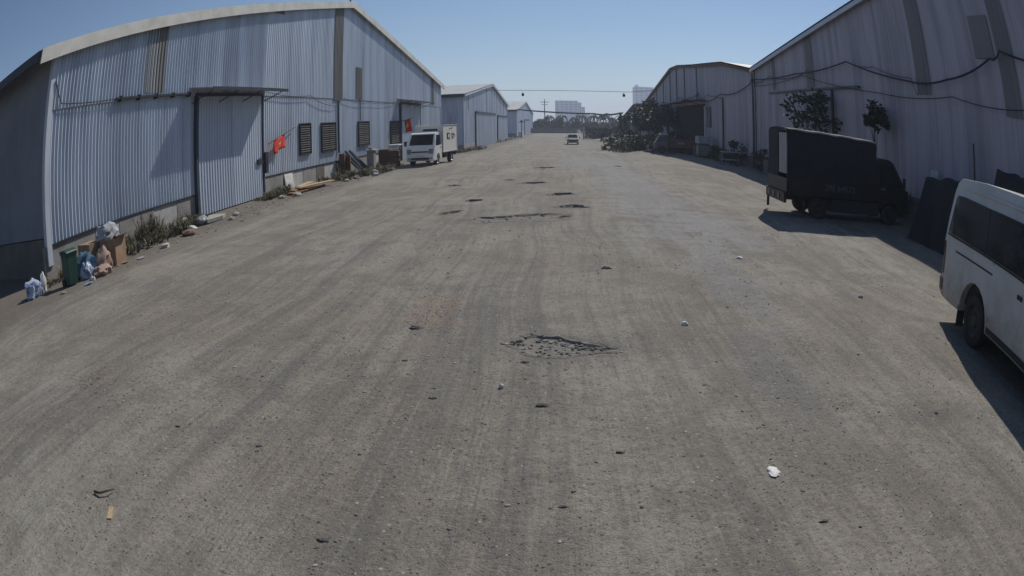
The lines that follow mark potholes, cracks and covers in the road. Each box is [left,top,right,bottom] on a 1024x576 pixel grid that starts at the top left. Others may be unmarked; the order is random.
pothole [458,213,575,224]
pothole [500,333,627,359]
